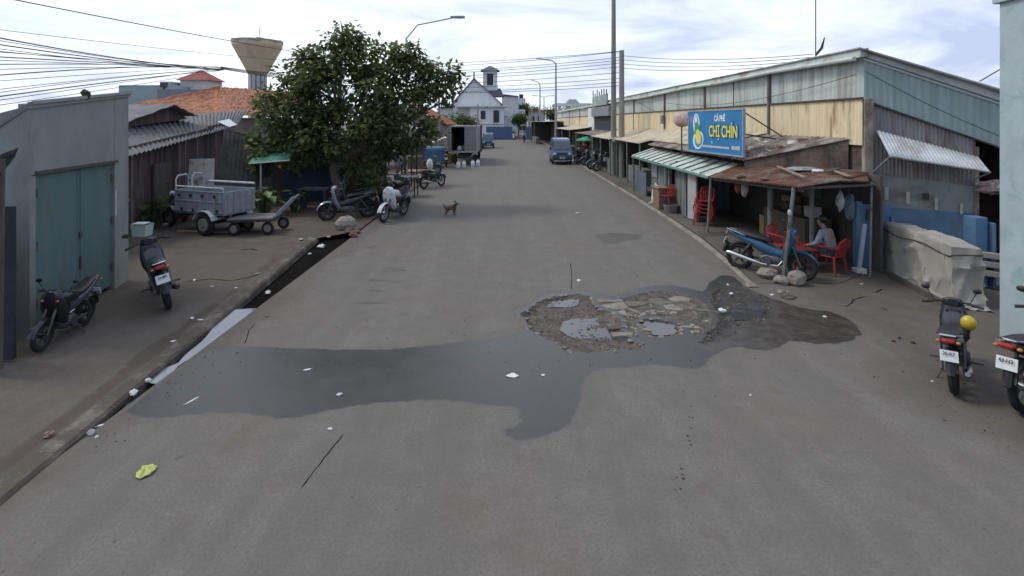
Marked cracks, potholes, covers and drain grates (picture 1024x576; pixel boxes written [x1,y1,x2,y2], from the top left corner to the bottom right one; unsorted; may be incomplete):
crack [301,434,344,488]
pothole [517,293,645,353]
pothole [636,317,684,338]
